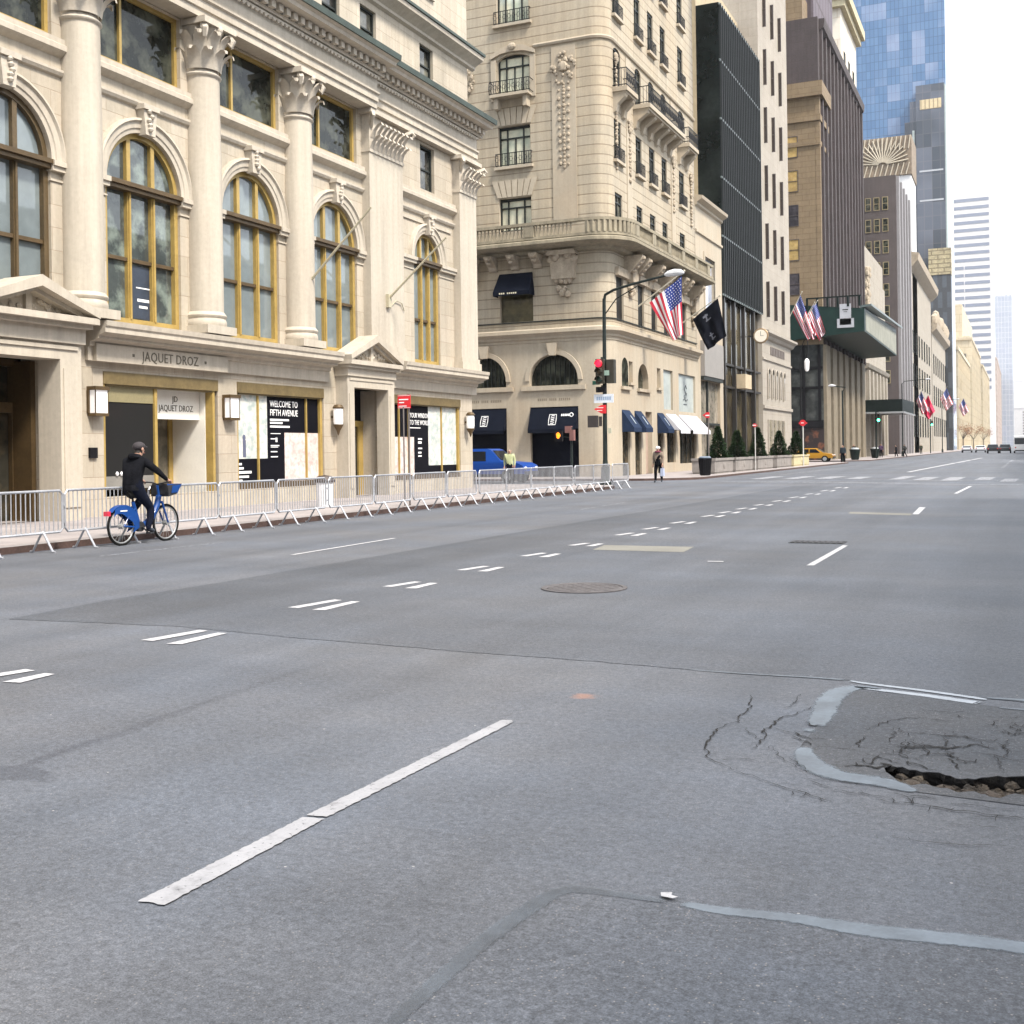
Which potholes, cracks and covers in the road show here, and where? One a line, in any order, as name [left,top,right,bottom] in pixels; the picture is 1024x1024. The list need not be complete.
manhole cover [541,582,627,594]
crack [704,694,1024,847]
pothole [884,766,1024,798]
